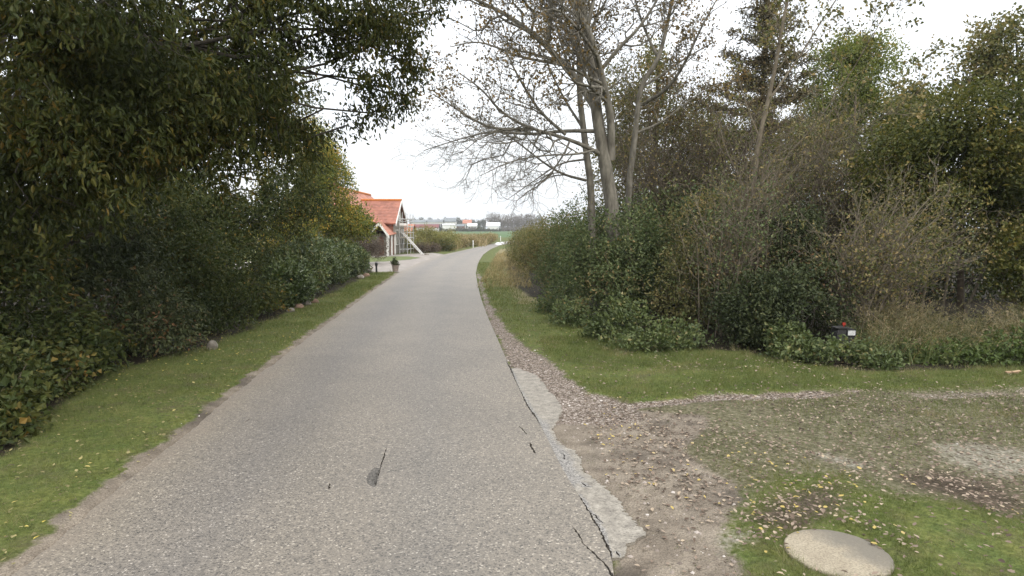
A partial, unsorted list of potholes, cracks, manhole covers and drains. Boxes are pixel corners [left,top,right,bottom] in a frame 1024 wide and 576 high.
pothole [366,467,380,487]
crack [507,363,538,453]
manhole cover [783,529,895,576]
crack [574,483,620,576]
